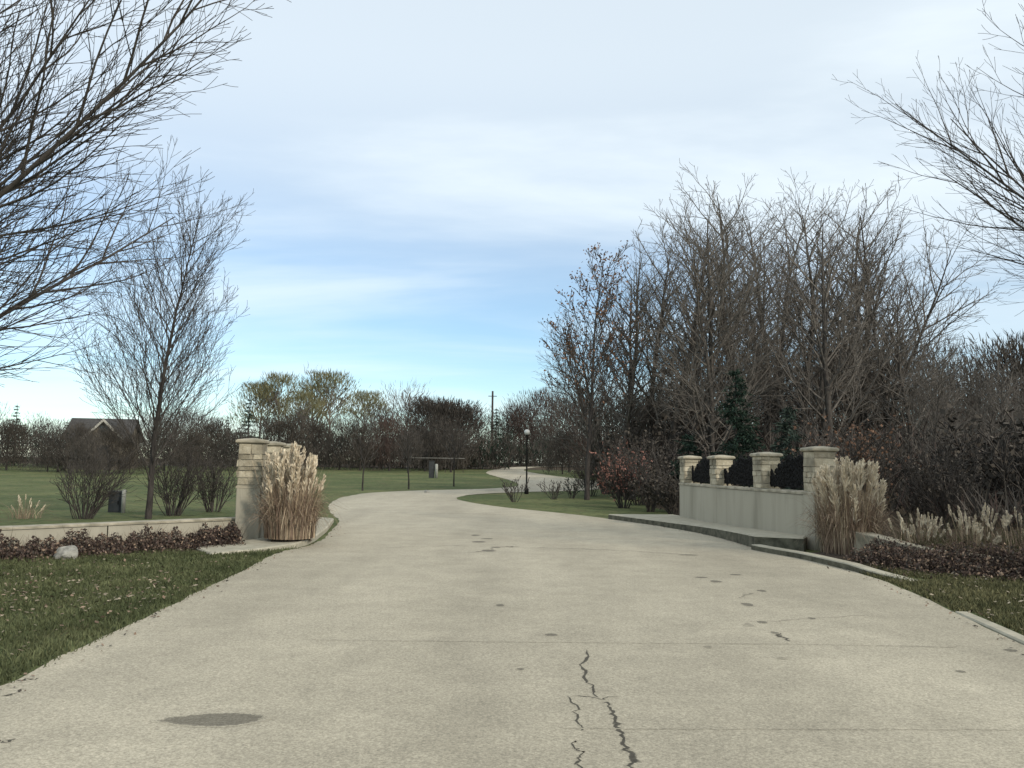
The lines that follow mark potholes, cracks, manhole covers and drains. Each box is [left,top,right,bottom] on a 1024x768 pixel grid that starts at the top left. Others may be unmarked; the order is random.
crack [307,615,1019,768]
